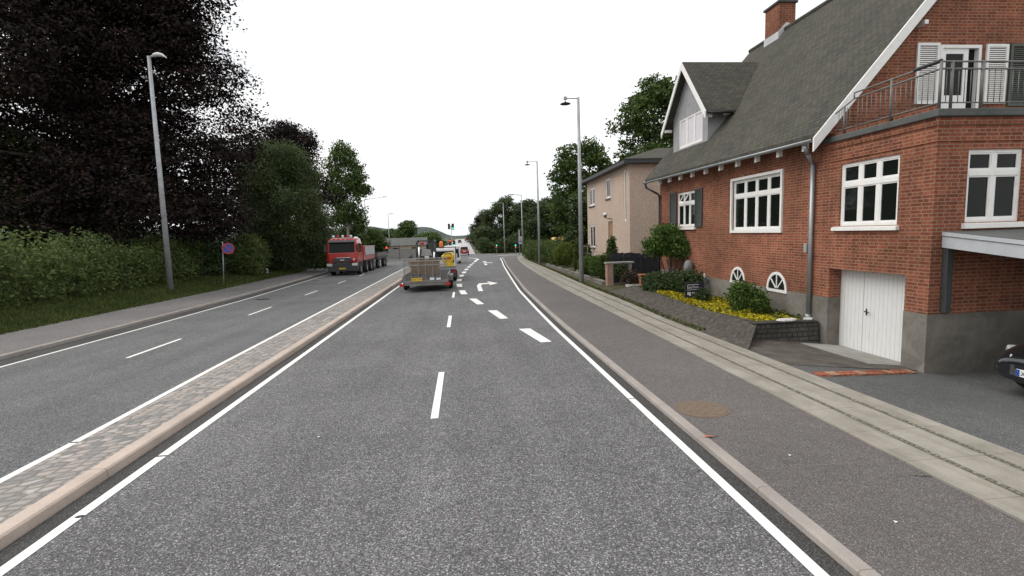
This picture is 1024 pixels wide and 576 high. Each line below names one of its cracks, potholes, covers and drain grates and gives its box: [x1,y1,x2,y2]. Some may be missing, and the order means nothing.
manhole cover [674,401,730,418]
